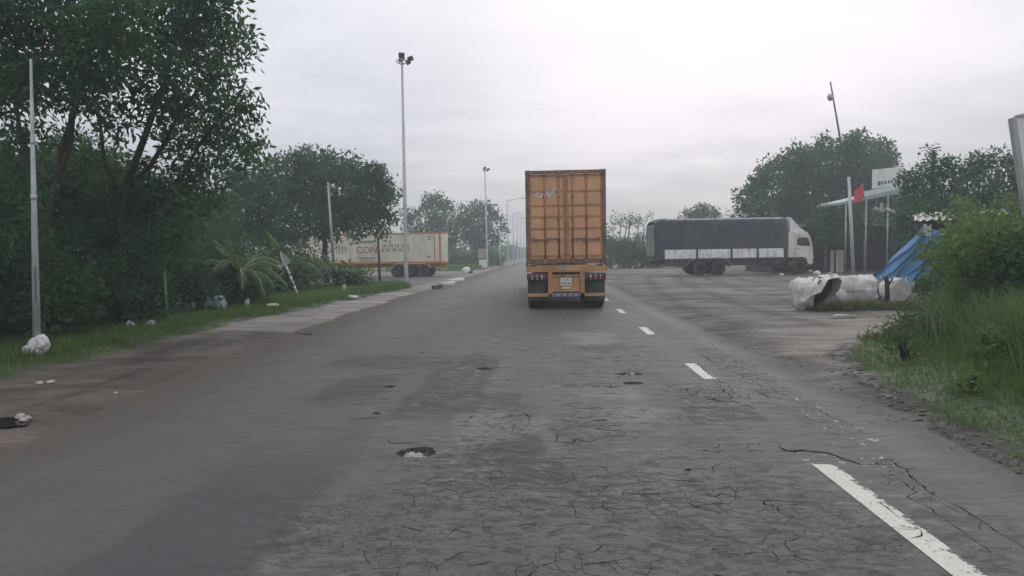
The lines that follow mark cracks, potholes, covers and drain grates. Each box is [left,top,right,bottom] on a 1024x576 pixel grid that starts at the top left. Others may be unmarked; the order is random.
pothole [395,446,437,457]
crack [307,343,1024,576]
